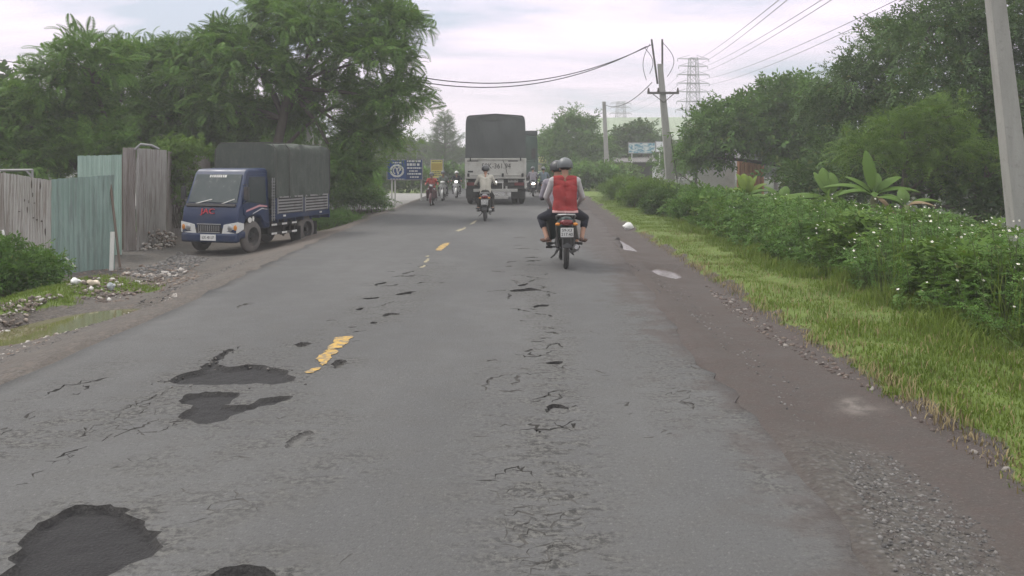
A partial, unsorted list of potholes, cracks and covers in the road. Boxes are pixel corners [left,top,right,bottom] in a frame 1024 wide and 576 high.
pothole [151,346,307,394]
crack [17,392,187,485]
pothole [285,431,315,448]
crack [0,377,109,435]
crack [474,237,587,576]
pothole [178,391,293,424]
pothole [0,504,163,576]
pothole [209,564,276,576]
